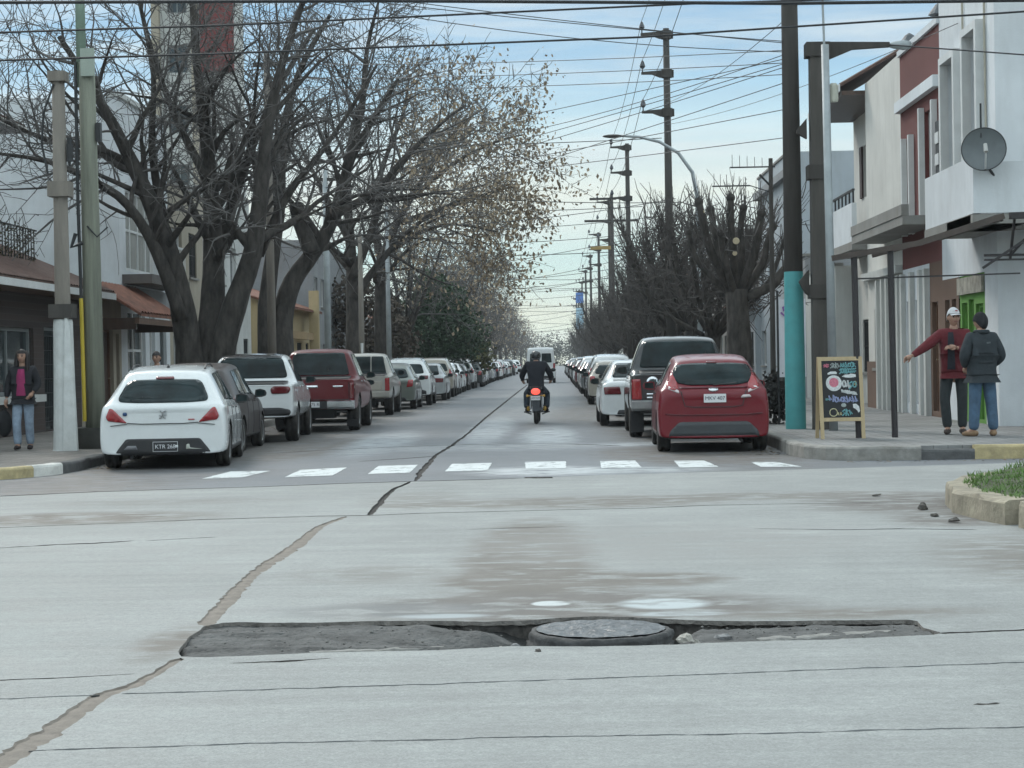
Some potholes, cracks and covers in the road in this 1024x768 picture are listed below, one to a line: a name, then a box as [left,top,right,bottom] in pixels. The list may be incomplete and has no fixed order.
crack [0,658,1024,768]
manhole cover [526,619,675,647]
pothole [178,616,942,659]
crack [149,517,346,627]
